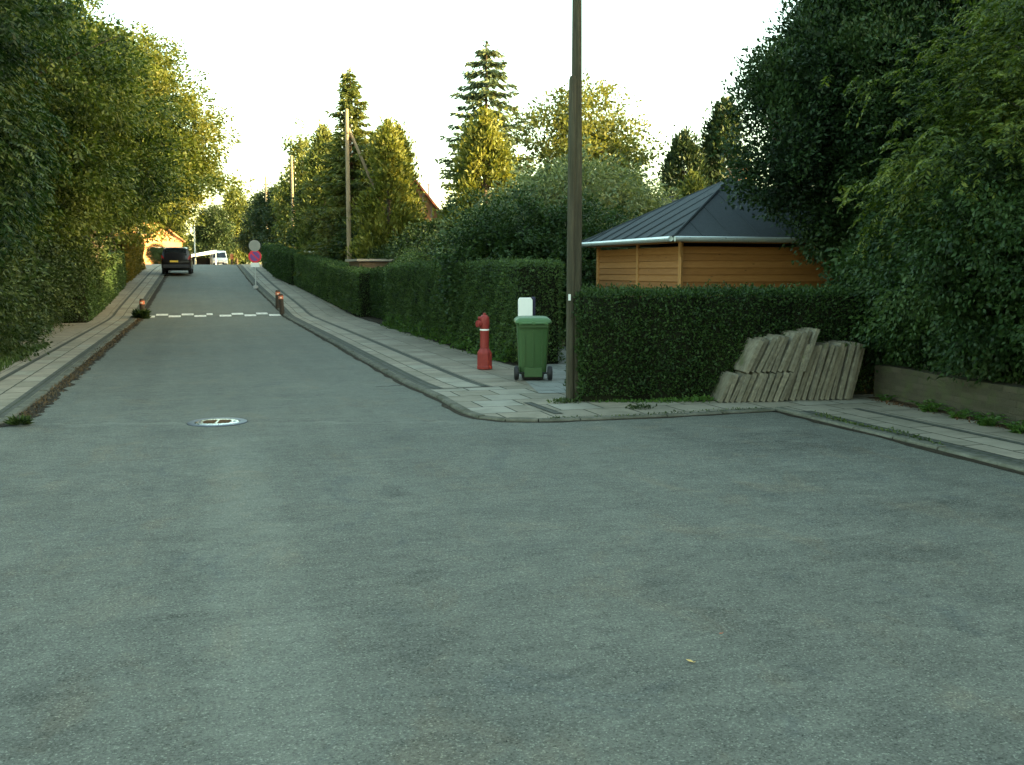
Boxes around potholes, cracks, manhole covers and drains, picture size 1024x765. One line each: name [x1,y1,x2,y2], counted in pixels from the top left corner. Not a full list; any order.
manhole cover [187,417,247,427]
